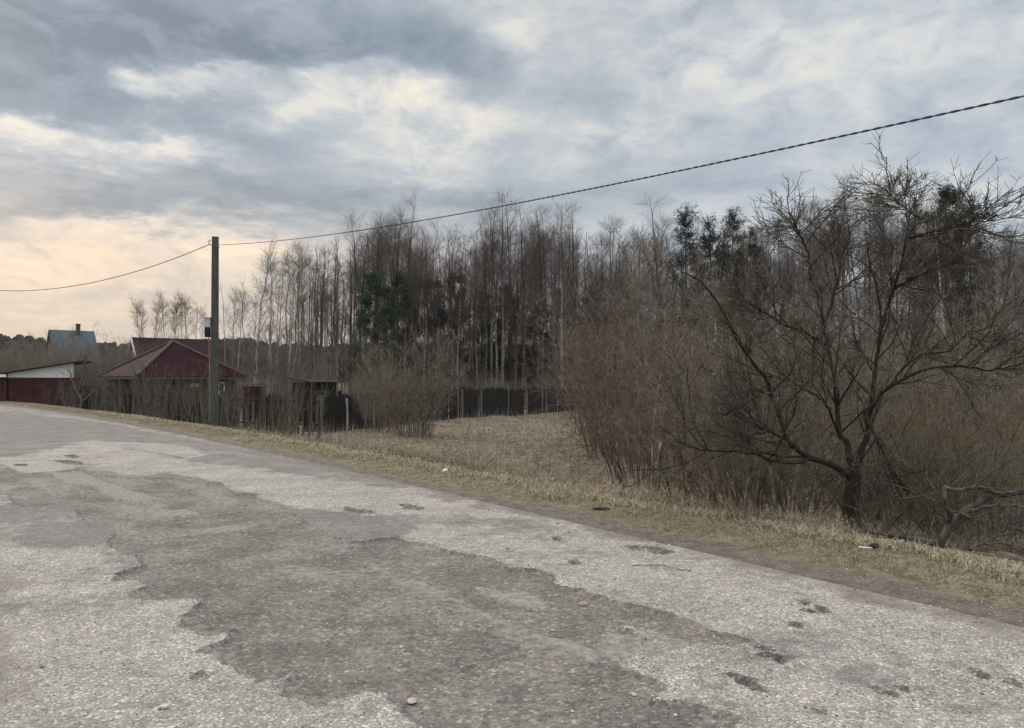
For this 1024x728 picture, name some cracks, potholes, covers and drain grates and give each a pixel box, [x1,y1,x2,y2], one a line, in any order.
pothole [865,684,902,698]
pothole [967,667,992,680]
pothole [755,651,800,665]
pothole [724,672,769,693]
pothole [892,684,924,693]
